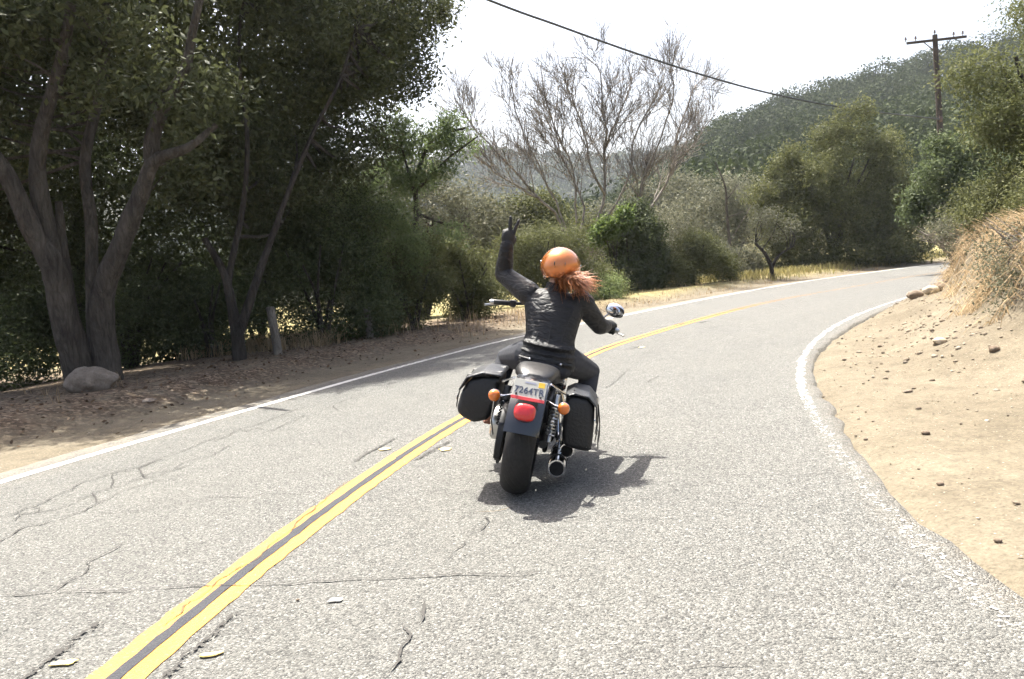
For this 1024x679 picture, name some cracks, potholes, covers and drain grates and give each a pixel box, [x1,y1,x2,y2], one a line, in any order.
crack [0,392,365,542]
crack [386,599,426,675]
crack [3,479,543,628]
